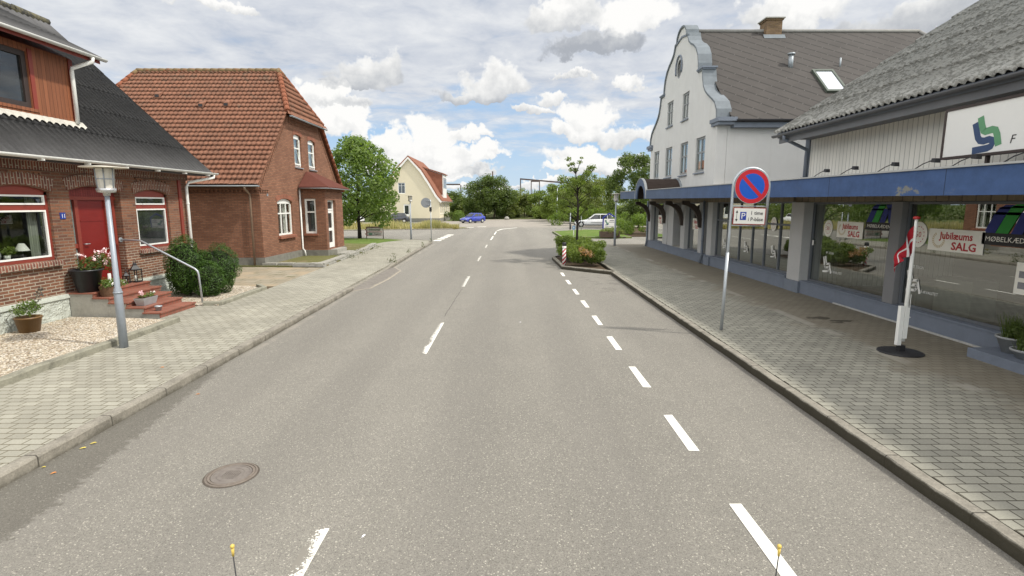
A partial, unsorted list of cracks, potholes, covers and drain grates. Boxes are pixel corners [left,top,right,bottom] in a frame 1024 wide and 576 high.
manhole cover [202,462,260,488]
